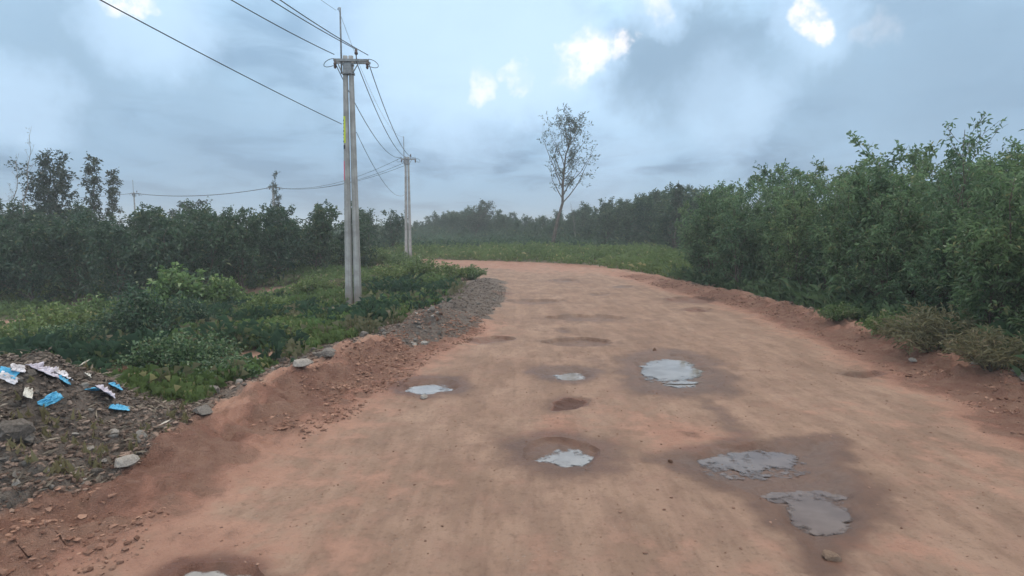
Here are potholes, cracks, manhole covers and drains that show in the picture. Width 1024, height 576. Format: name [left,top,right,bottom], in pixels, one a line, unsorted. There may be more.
pothole [533,367,595,381]
pothole [394,377,463,395]
pothole [522,437,601,468]
pothole [546,396,592,412]
pothole [660,436,875,568]
pothole [540,337,615,346]
pothole [842,370,889,379]
pothole [631,351,724,392]
pothole [466,336,516,344]
pothole [173,562,265,576]
